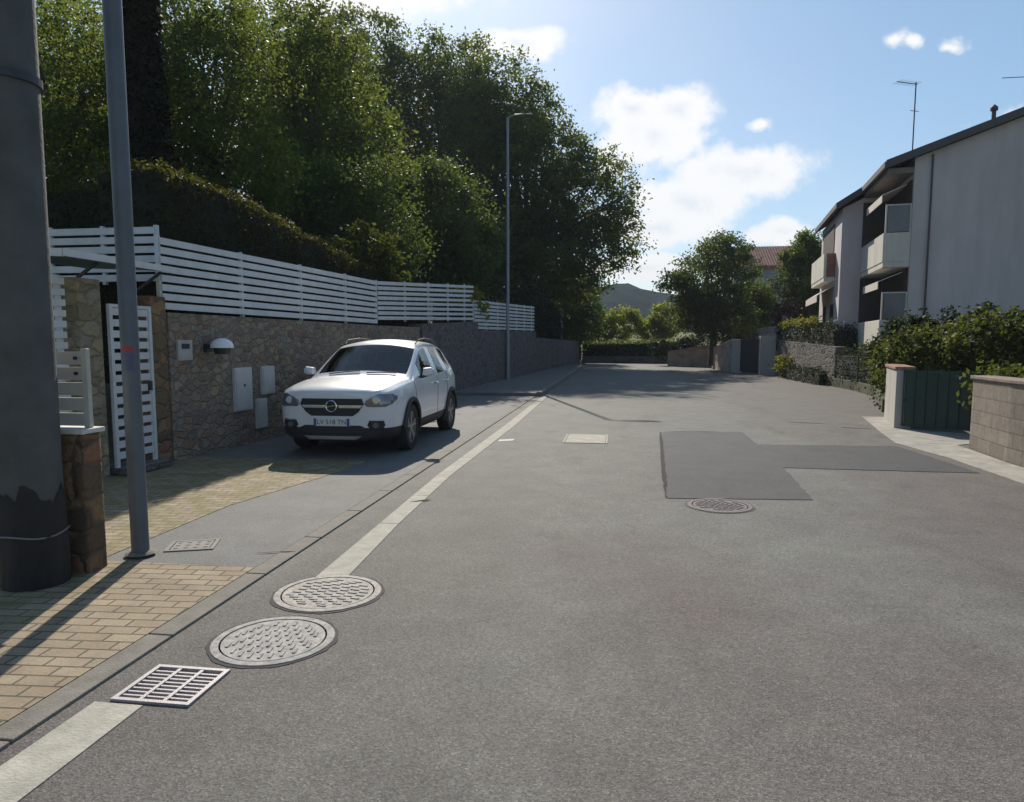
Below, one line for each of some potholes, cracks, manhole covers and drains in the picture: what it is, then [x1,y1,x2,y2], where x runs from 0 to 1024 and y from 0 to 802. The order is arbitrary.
drain grate [110,664,231,707]
manhole cover [685,498,756,514]
utility cover [562,434,608,444]
manhole cover [205,615,338,668]
manhole cover [270,575,385,614]
